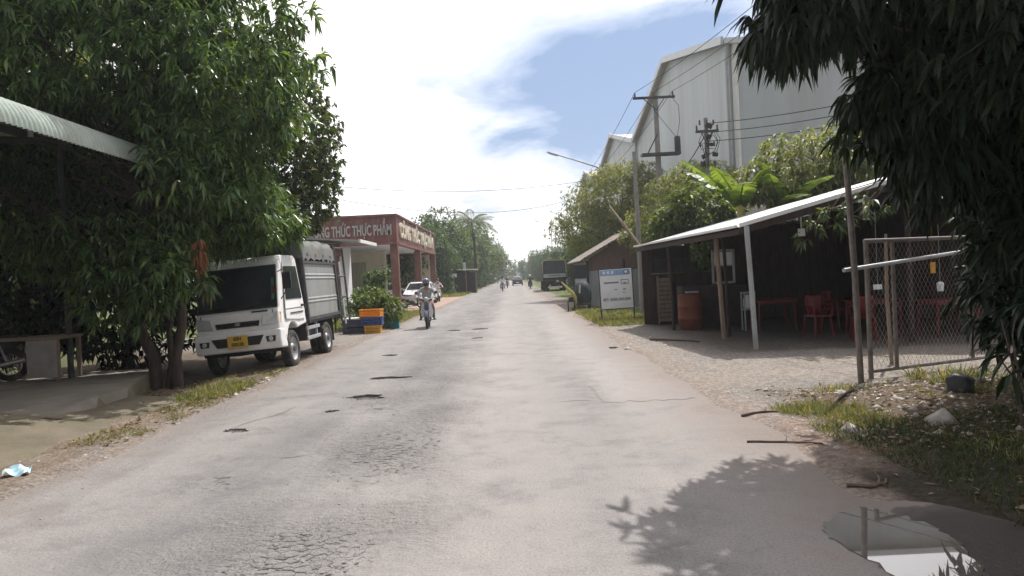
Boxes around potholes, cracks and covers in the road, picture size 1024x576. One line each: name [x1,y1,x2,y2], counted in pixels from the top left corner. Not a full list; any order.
crack [201,520,389,576]
crack [325,423,451,491]
